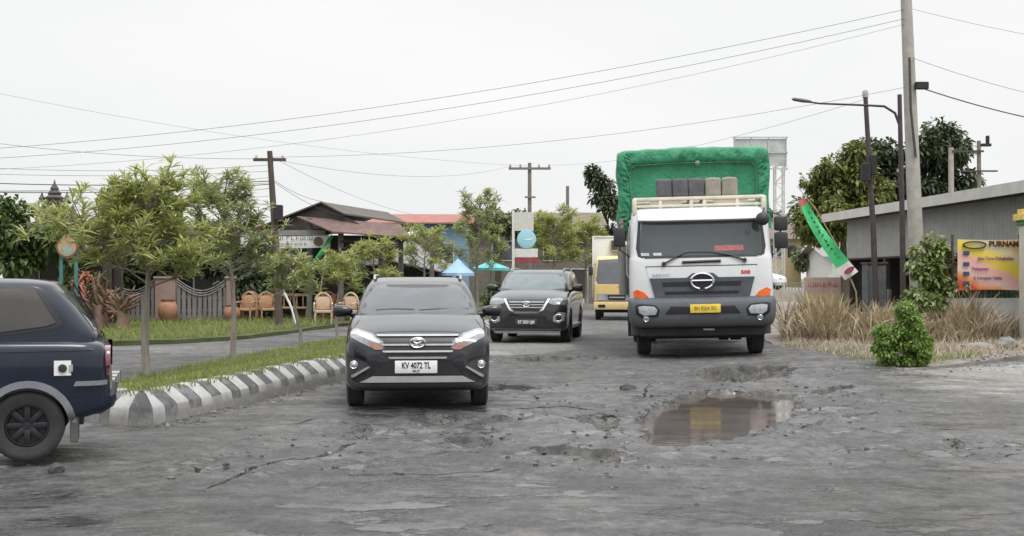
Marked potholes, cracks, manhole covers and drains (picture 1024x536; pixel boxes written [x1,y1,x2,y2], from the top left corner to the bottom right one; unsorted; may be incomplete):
pothole [488,383,542,391]
crack [191,442,369,489]
pothole [404,412,533,426]
pothole [440,431,496,452]
pothole [691,364,816,383]
pothole [523,442,640,465]
pothole [618,389,815,450]
